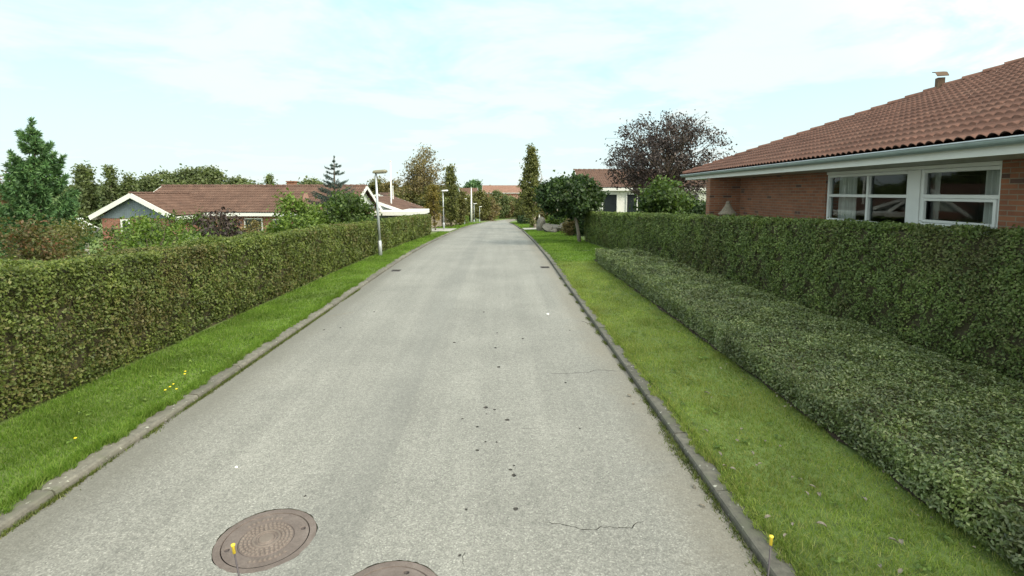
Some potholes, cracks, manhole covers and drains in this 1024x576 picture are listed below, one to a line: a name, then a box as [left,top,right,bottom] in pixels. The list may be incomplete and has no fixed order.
manhole cover [212,509,317,574]
crack [550,521,643,530]
manhole cover [354,561,437,576]
